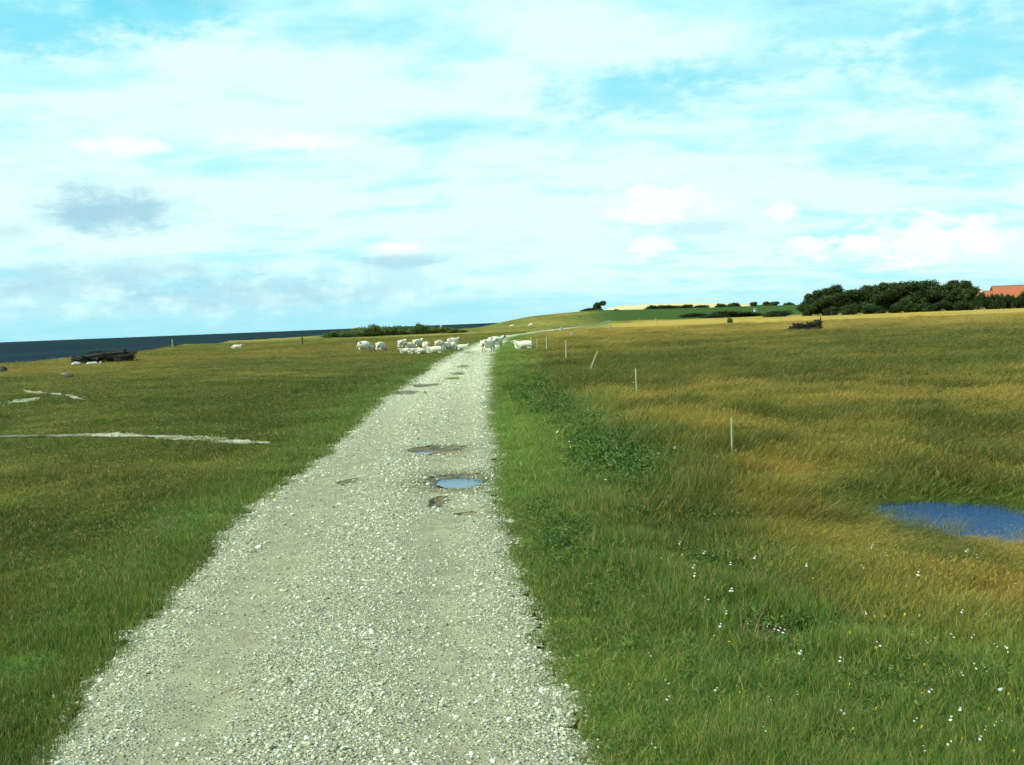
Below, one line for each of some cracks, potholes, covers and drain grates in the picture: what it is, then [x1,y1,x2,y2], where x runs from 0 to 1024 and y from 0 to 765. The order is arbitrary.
pothole [428,496,447,508]
pothole [408,446,468,455]
pothole [424,473,496,489]
